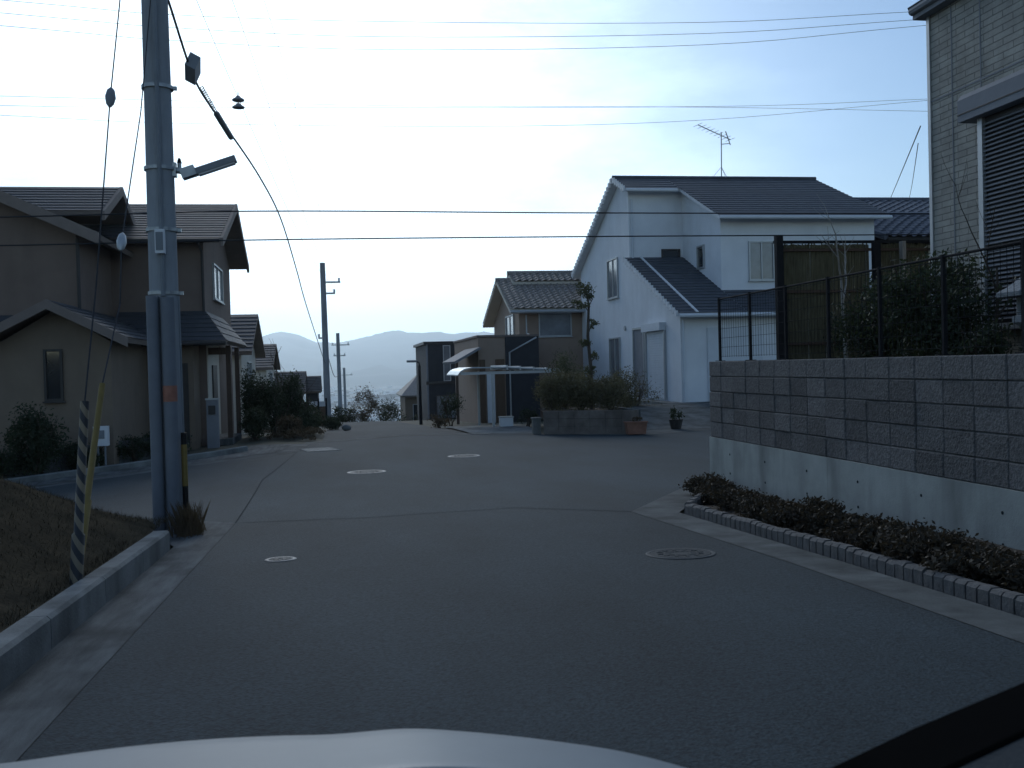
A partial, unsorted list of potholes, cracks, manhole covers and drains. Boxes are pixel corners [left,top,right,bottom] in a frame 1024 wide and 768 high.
manhole cover [645,548,716,559]
